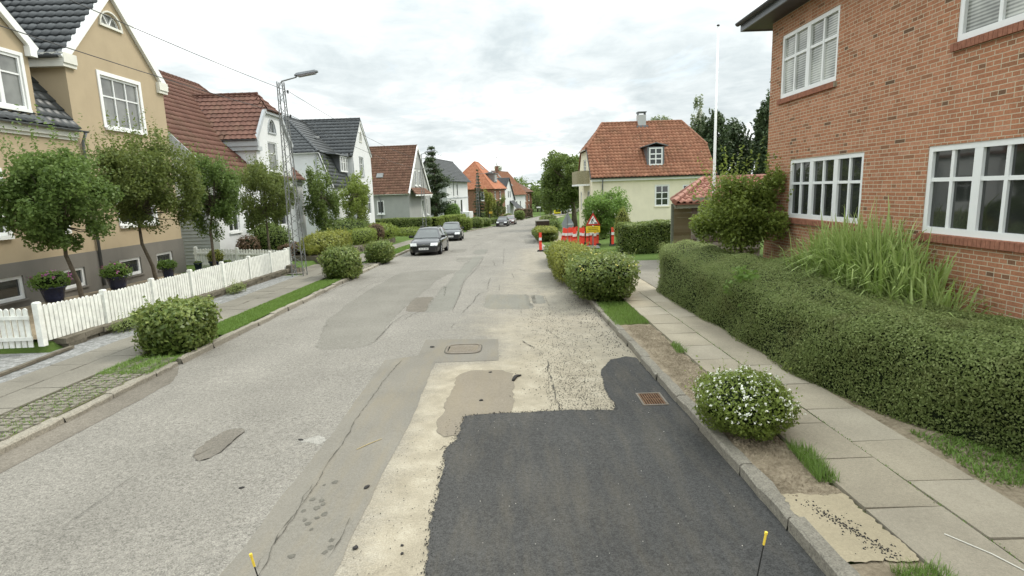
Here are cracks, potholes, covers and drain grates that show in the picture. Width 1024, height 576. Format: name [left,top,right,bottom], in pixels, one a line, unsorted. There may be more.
crack [256,360,402,576]
manhole cover [444,344,482,354]
drain grate [635,392,669,406]
